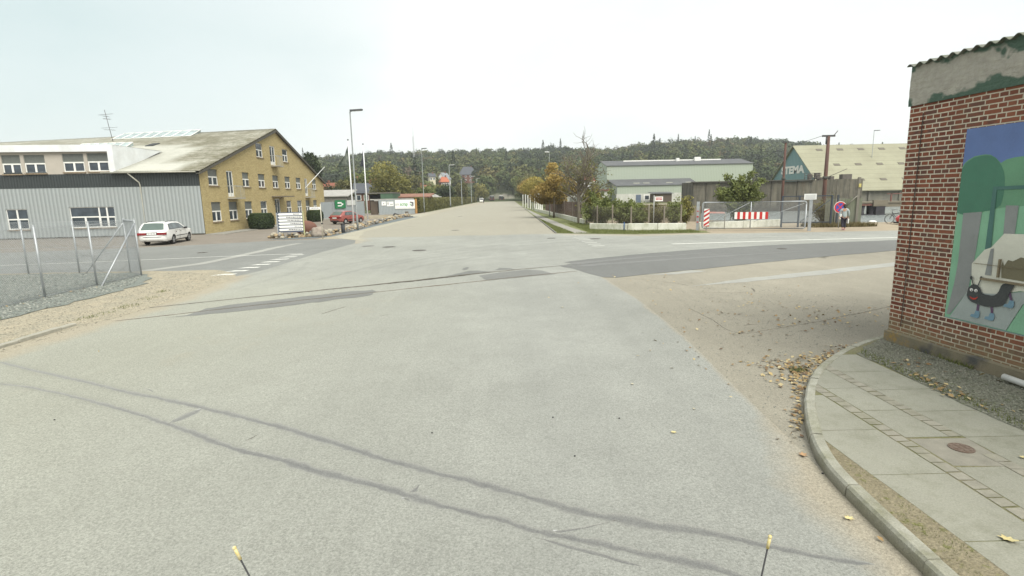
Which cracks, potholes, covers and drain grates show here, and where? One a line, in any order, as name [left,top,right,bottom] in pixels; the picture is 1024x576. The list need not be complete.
manhole cover [947,443,976,453]
